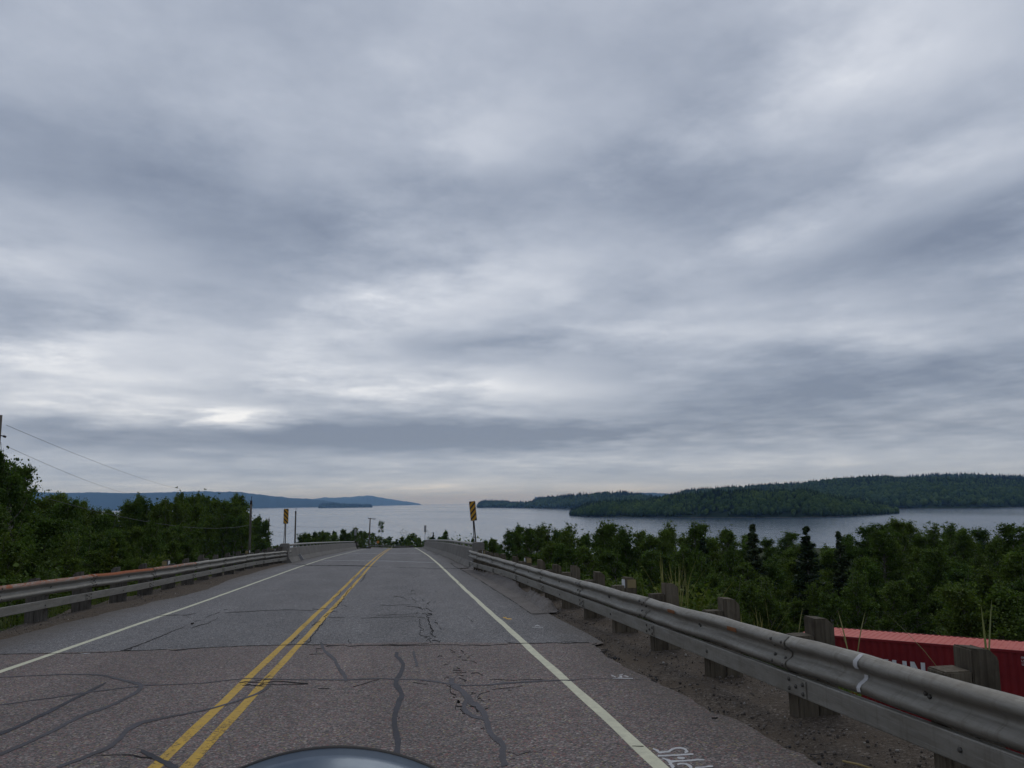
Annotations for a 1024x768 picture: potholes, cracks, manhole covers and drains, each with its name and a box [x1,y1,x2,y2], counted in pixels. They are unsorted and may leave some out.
crack [370,576,546,760]
crack [121,574,366,654]
